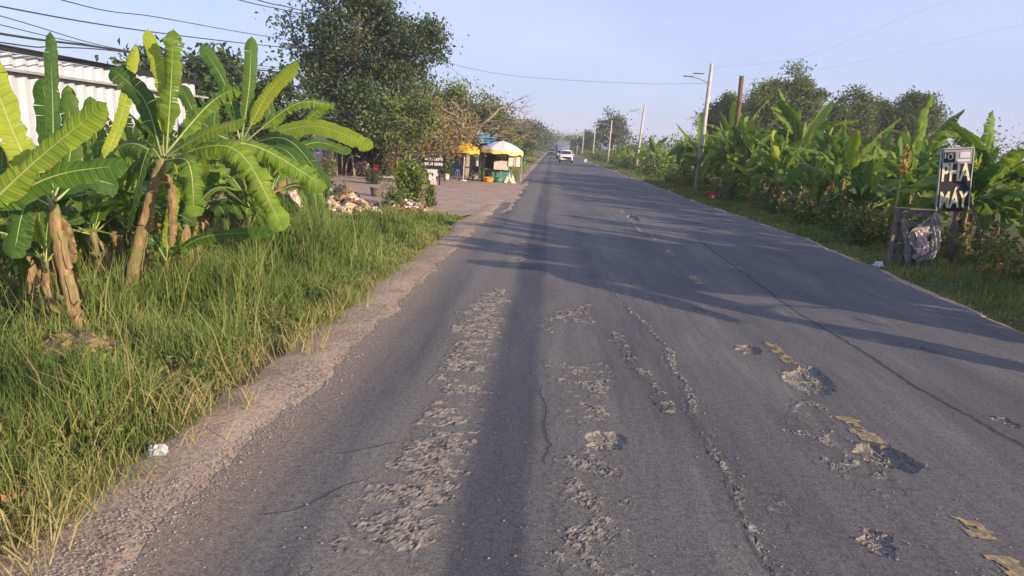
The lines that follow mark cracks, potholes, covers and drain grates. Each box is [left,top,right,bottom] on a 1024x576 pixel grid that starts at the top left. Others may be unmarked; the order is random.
pothole [853,526,901,561]
pothole [585,430,629,452]
pothole [781,362,840,397]
crack [265,287,918,576]
pothole [848,442,930,474]
pothole [733,345,763,355]
pothole [988,414,1023,429]
